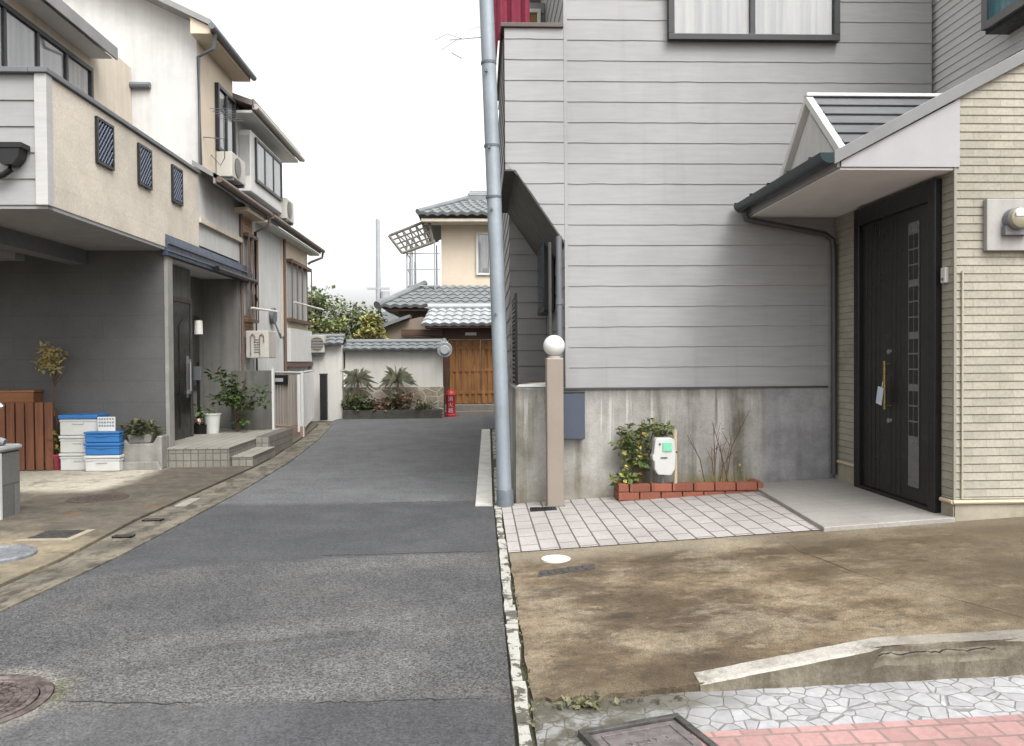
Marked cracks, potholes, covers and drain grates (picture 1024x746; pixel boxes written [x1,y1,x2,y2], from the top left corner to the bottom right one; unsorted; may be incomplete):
manhole cover [15,529,95,541]
manhole cover [578,713,719,746]
manhole cover [0,545,38,564]
manhole cover [66,493,130,503]
crack [878,647,996,656]
manhole cover [0,674,54,724]
